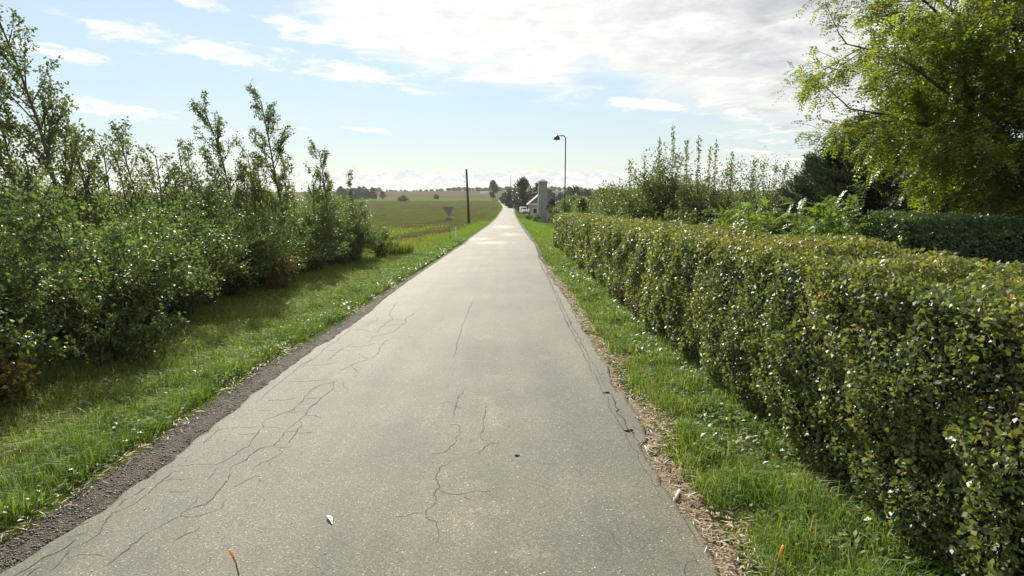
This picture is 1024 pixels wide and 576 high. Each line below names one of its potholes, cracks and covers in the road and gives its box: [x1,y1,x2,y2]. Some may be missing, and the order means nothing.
crack [539,261,606,387]
crack [17,303,407,576]
crack [399,389,498,537]
